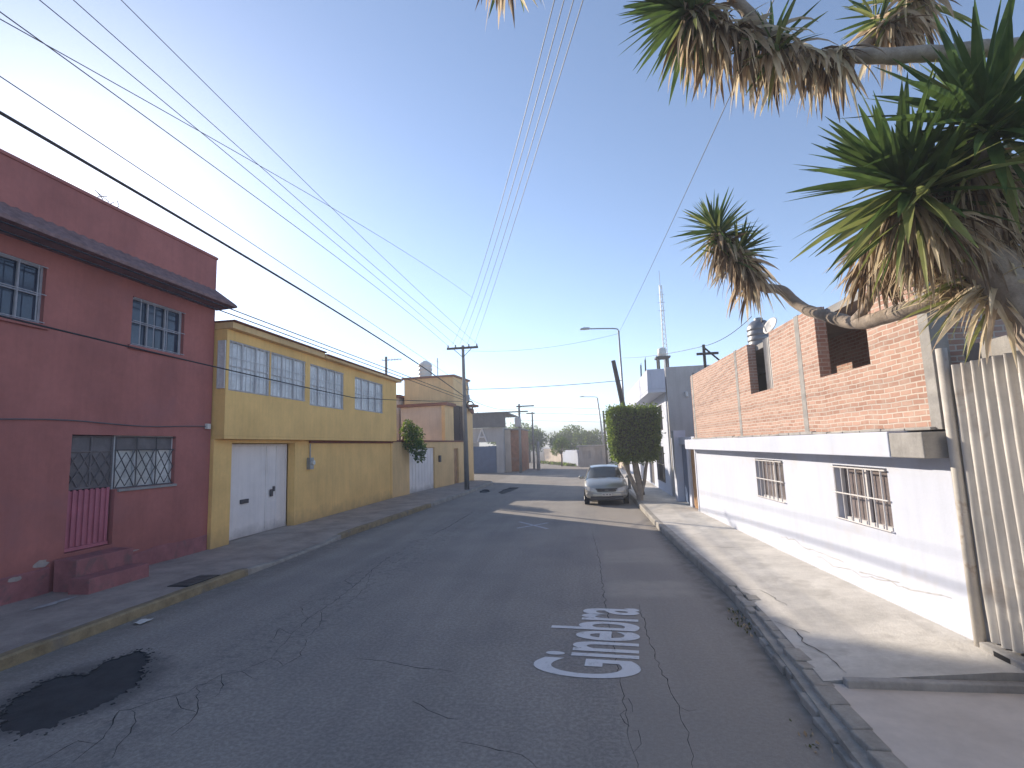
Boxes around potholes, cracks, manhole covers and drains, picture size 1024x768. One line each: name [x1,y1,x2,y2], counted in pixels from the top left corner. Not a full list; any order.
crack [271,553,410,664]
crack [640,613,694,767]
crack [42,660,266,762]
crack [593,537,641,763]
